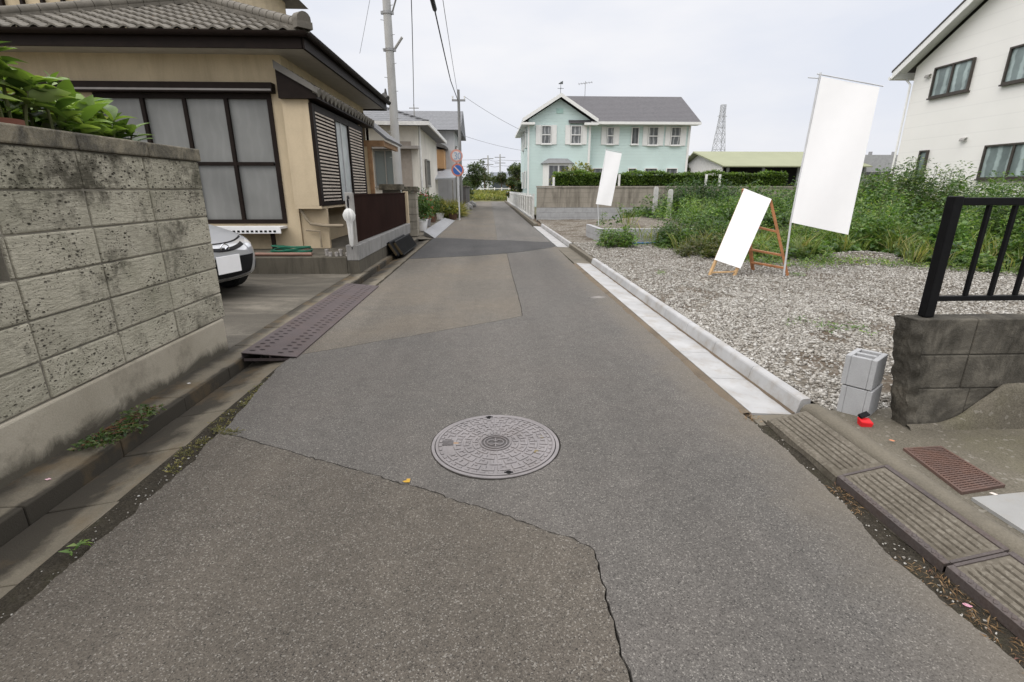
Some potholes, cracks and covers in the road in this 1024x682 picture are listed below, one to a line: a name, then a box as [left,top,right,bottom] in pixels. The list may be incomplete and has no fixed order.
drain grate [903,446,1005,495]
manhole cover [431,415,561,480]
crack [212,430,632,682]
